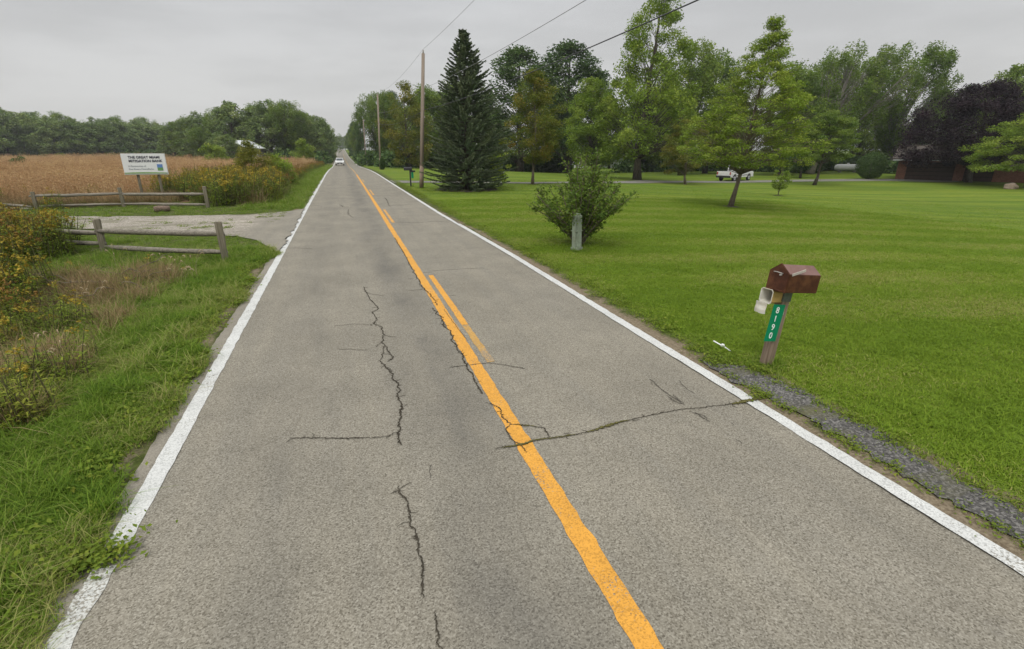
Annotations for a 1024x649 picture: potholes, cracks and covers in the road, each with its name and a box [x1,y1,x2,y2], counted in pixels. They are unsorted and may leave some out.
crack [395,239,763,451]
crack [288,287,403,444]
crack [392,482,443,649]
